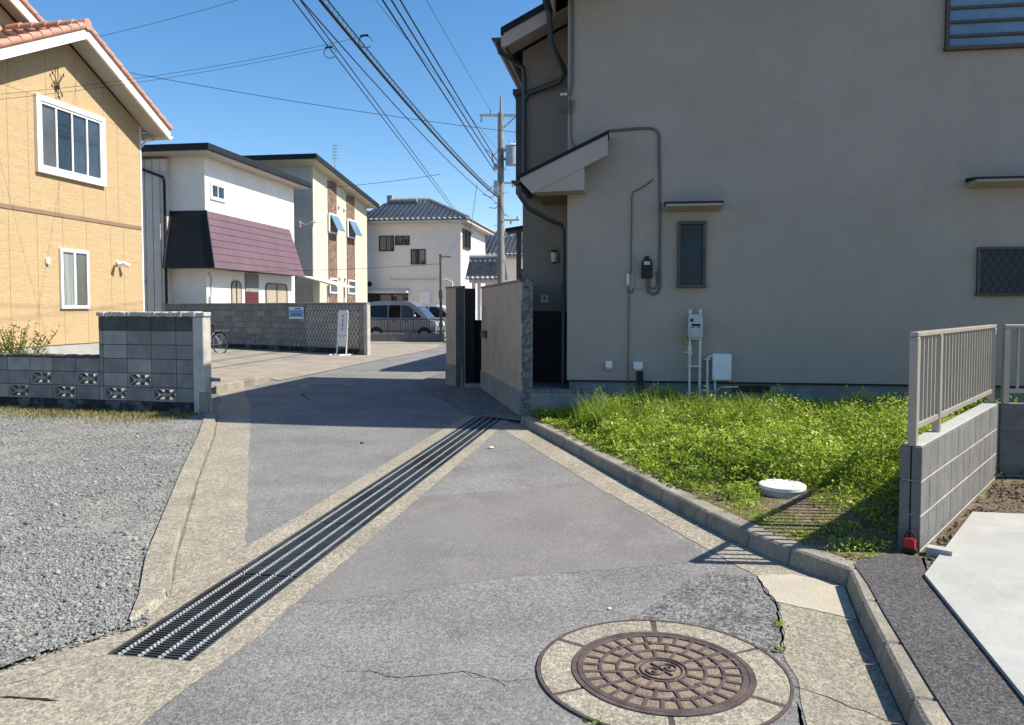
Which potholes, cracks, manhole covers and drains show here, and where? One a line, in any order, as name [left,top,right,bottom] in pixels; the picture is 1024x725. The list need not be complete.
drain grate [235,522,366,578]
crack [758,580,784,649]
drain grate [457,417,502,430]
drain grate [435,429,487,445]
drain grate [108,572,299,661]
drain grate [406,443,469,464]
crack [352,671,533,686]
drain grate [367,462,444,490]
drain grate [313,487,411,525]
manhole cover [537,619,794,725]
